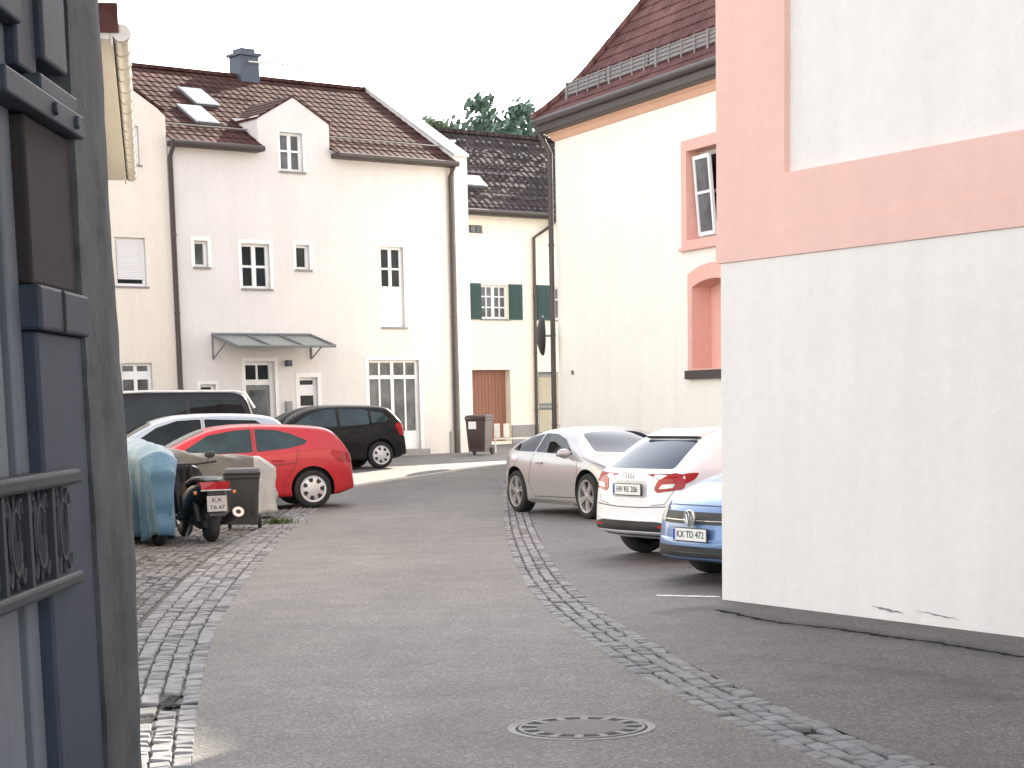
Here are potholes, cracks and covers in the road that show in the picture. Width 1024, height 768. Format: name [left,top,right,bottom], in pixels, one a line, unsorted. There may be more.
manhole cover [508,715,656,741]
